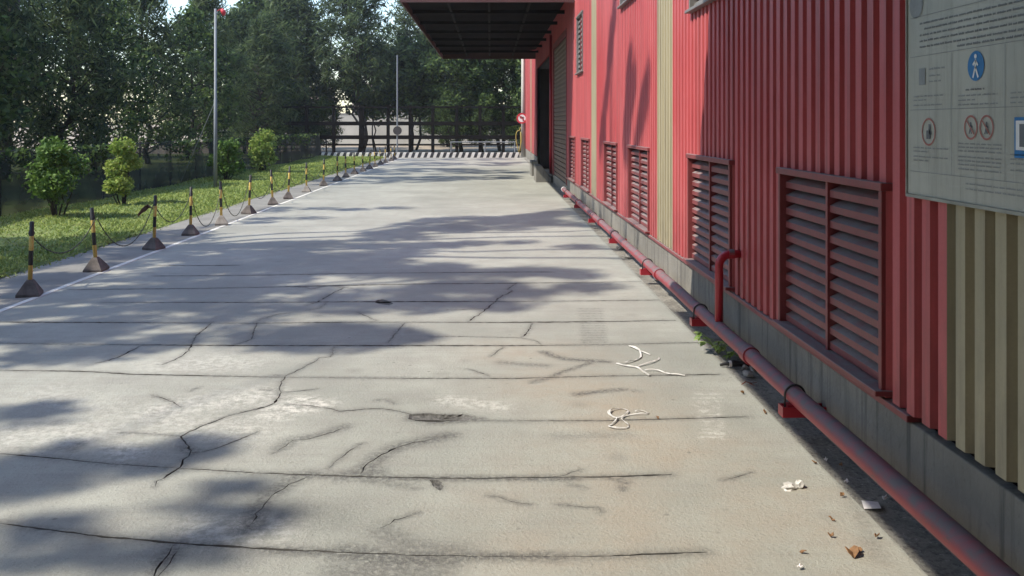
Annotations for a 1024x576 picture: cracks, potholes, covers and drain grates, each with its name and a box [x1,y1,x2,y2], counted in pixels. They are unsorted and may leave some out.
crack [445,284,538,354]
crack [280,429,443,473]
crack [154,542,181,576]
pothole [408,413,472,421]
crack [144,349,409,486]
